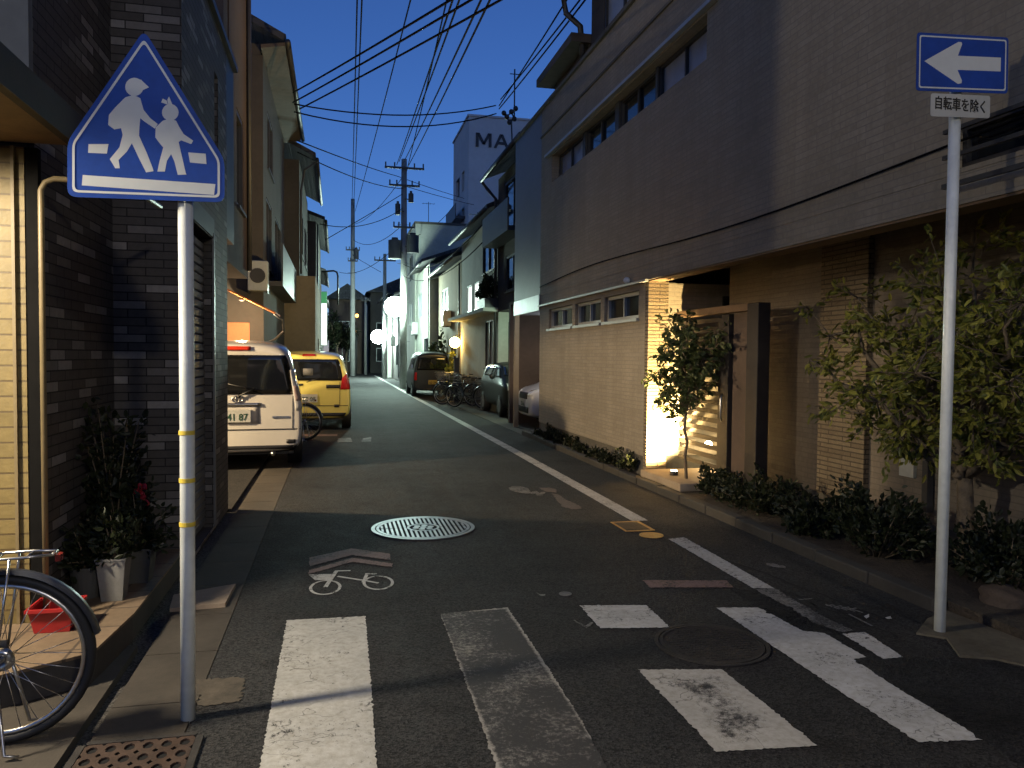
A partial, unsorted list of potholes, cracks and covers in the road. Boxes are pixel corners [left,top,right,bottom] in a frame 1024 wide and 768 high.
manhole cover [654,623,771,667]
drain grate [63,731,204,768]
